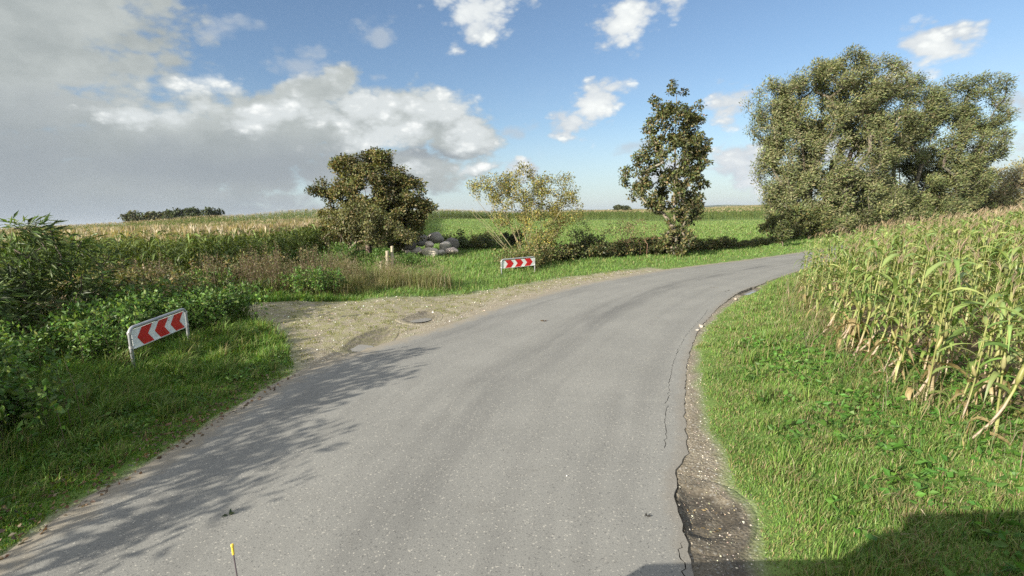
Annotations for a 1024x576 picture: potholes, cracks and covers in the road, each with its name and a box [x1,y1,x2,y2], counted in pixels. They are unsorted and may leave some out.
pothole [332,325,400,355]
pothole [675,474,758,556]
crack [664,314,705,448]
